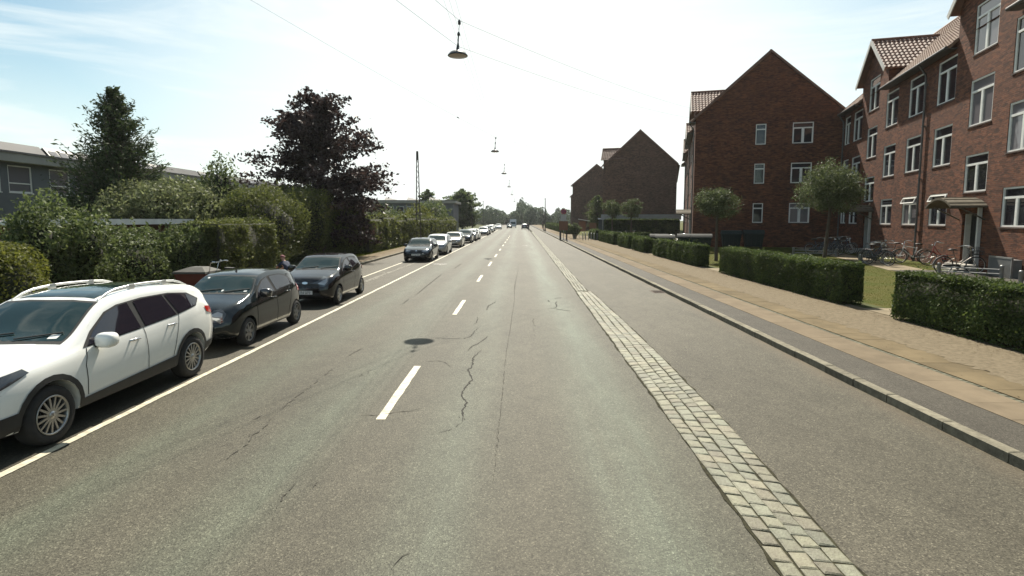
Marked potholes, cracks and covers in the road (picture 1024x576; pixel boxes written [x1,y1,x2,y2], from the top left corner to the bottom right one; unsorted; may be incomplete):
crack [227,369,332,459]
crack [439,302,495,433]
